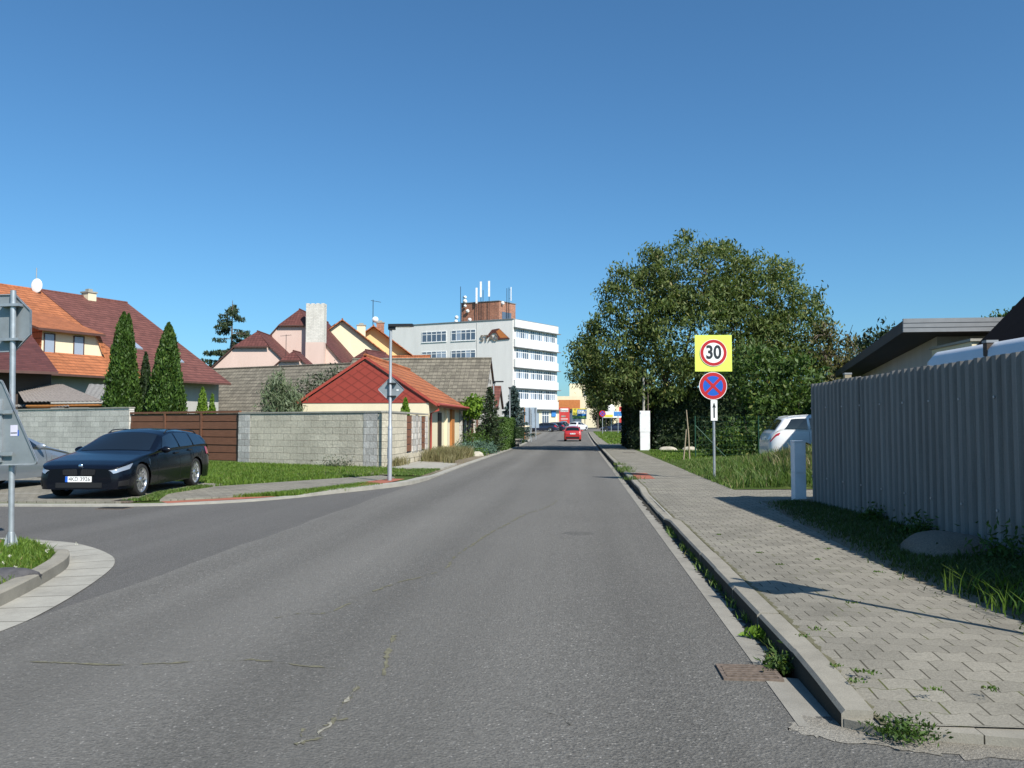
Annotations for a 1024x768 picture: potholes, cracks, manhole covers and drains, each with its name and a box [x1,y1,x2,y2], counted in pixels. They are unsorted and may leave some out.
crack [17,658,327,668]
crack [382,631,400,675]
crack [293,685,360,745]
drain grate [715,664,784,682]
